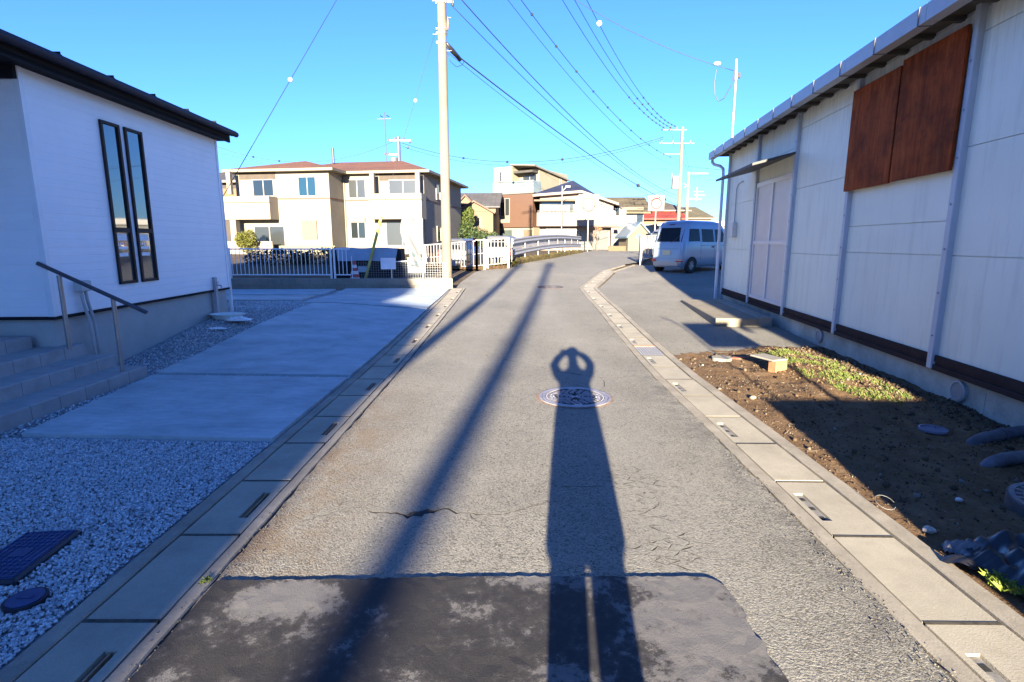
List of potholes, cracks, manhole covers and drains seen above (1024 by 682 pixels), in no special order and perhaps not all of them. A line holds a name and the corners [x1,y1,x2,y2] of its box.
manhole cover [536,387,614,409]
crack [562,467,714,572]
drain grate [633,345,664,356]
crack [300,502,545,523]
